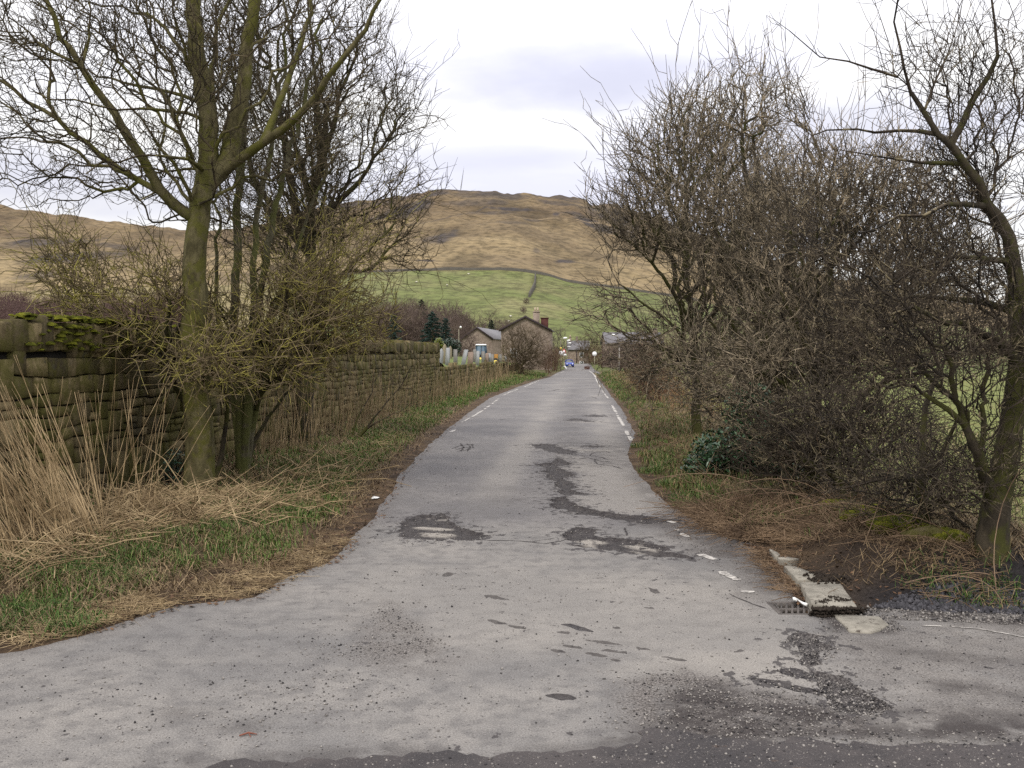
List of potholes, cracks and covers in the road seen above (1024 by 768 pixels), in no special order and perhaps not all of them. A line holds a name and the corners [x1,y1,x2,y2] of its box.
pothole [787,632,839,668]
pothole [809,670,895,715]
drain grate [767,602,810,615]
